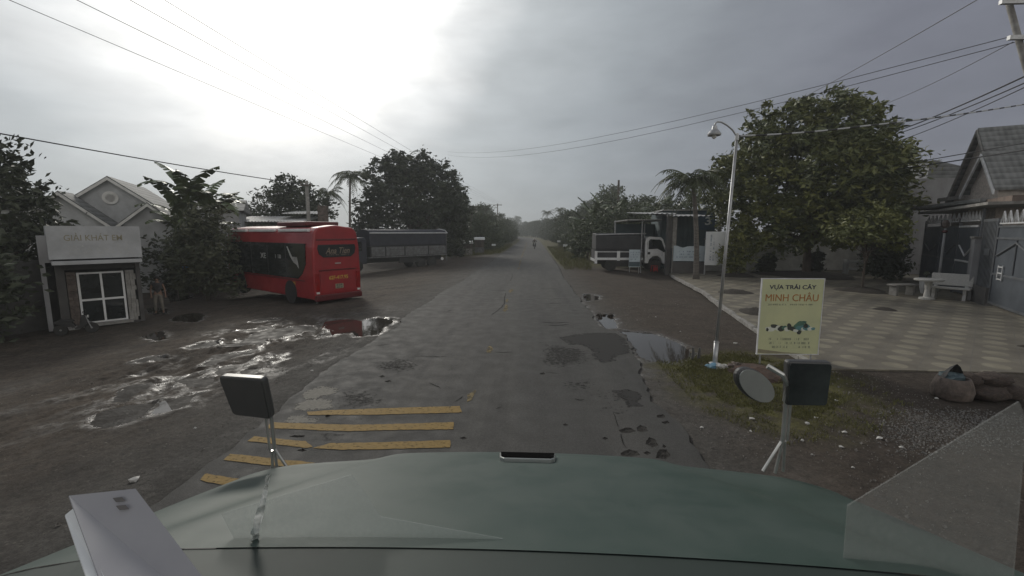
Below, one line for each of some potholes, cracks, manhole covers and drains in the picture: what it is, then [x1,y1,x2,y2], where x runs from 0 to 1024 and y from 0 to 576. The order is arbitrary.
pothole [620,449,640,457]
pothole [656,449,670,459]
